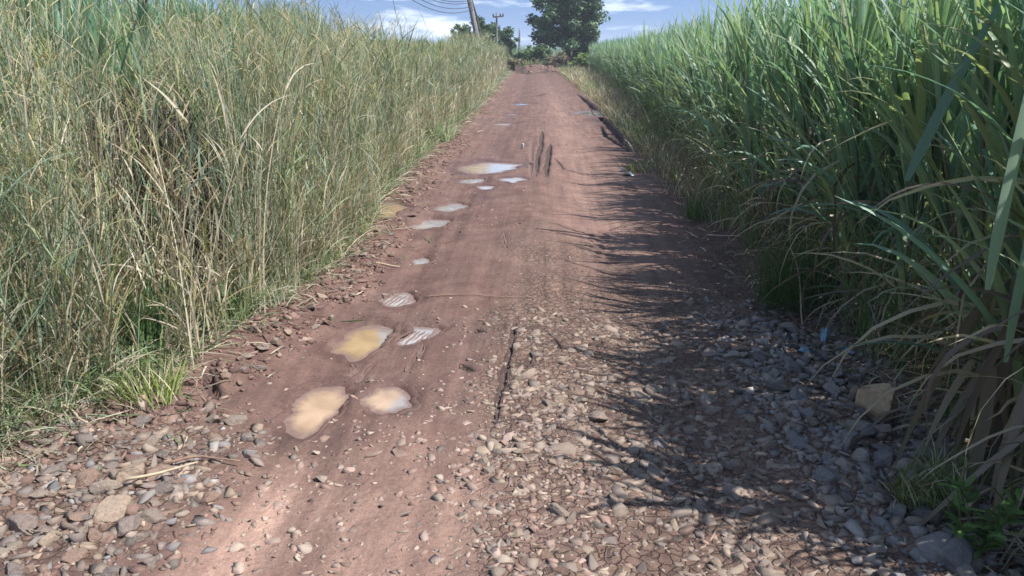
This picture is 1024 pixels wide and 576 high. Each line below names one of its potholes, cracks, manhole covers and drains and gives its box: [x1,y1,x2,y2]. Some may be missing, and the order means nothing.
pothole [444,159,533,176]
pothole [346,380,421,419]
pothole [492,175,533,184]
pothole [316,316,414,367]
pothole [396,207,457,230]
crack [474,320,563,423]
pothole [269,376,361,449]
